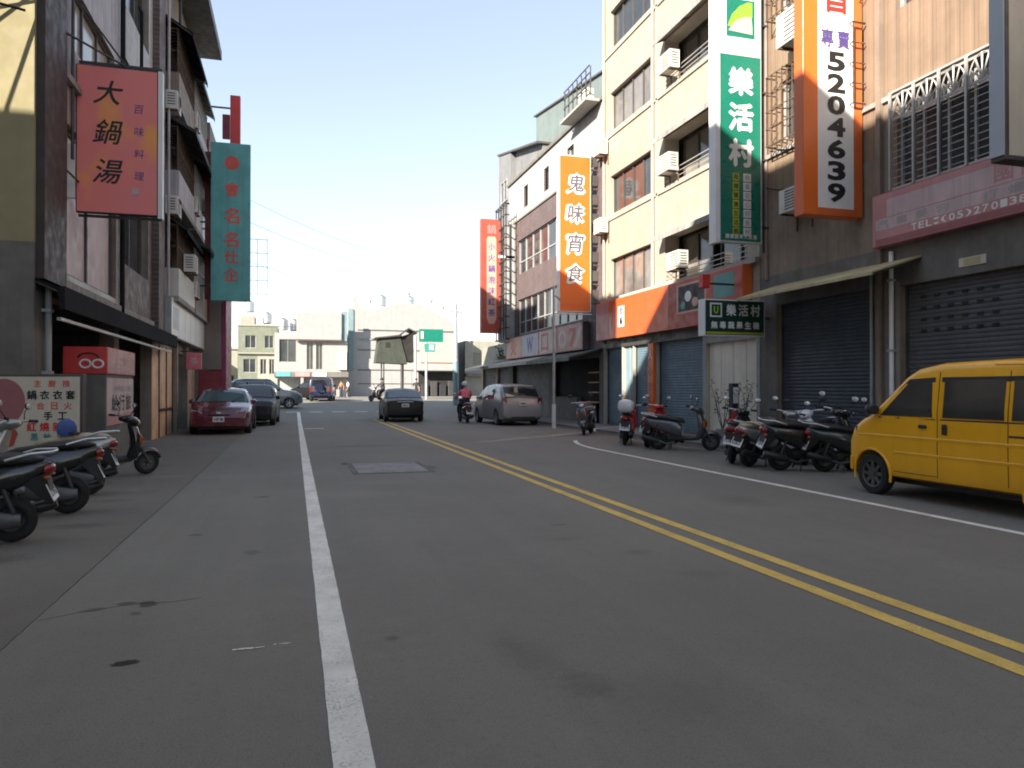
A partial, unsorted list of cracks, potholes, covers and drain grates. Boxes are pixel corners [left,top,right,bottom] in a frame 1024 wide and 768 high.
manhole cover [346,461,435,474]
